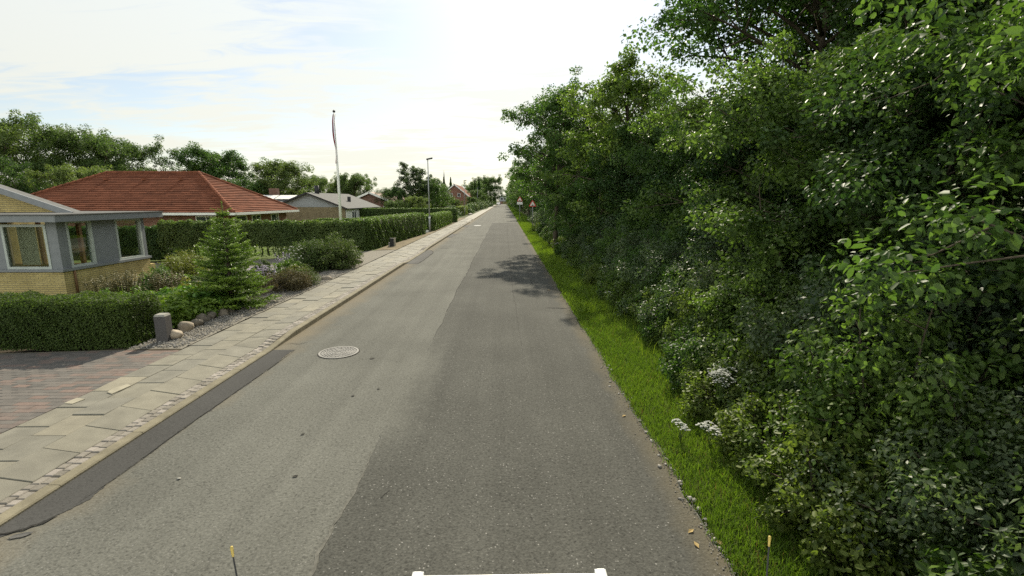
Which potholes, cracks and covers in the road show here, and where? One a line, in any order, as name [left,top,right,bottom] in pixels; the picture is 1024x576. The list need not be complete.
manhole cover [317,346,360,359]
